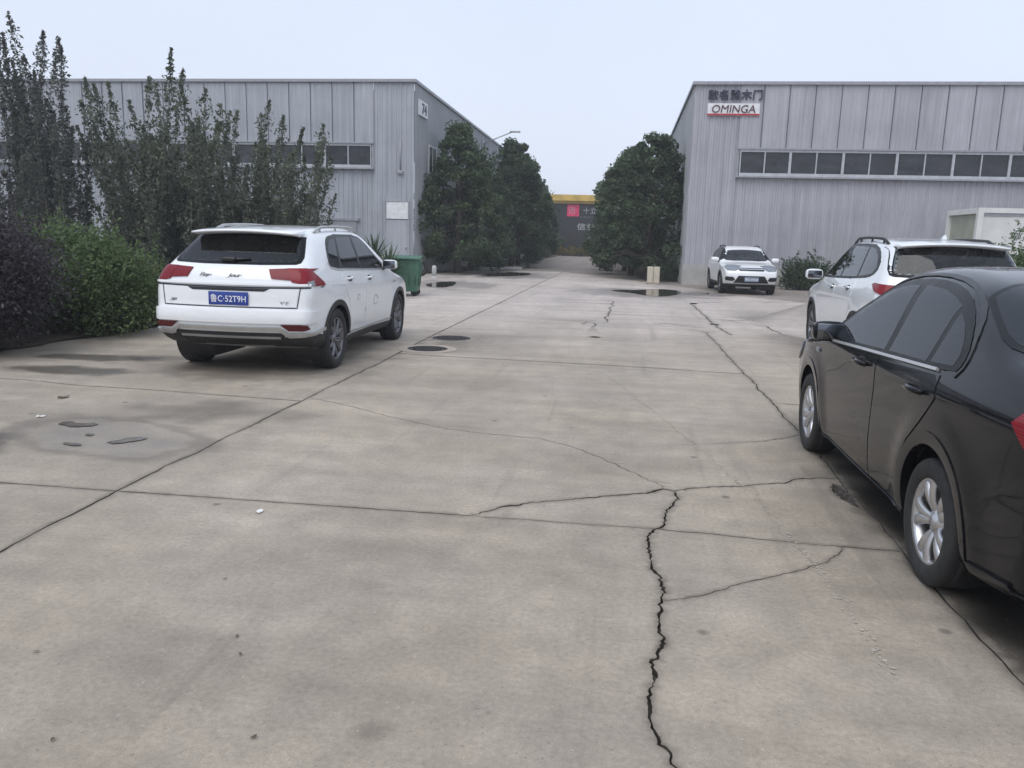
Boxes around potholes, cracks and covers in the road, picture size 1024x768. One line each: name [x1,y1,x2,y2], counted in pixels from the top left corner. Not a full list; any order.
manhole cover [398,344,457,353]
crack [319,399,842,768]
pothole [831,484,859,508]
